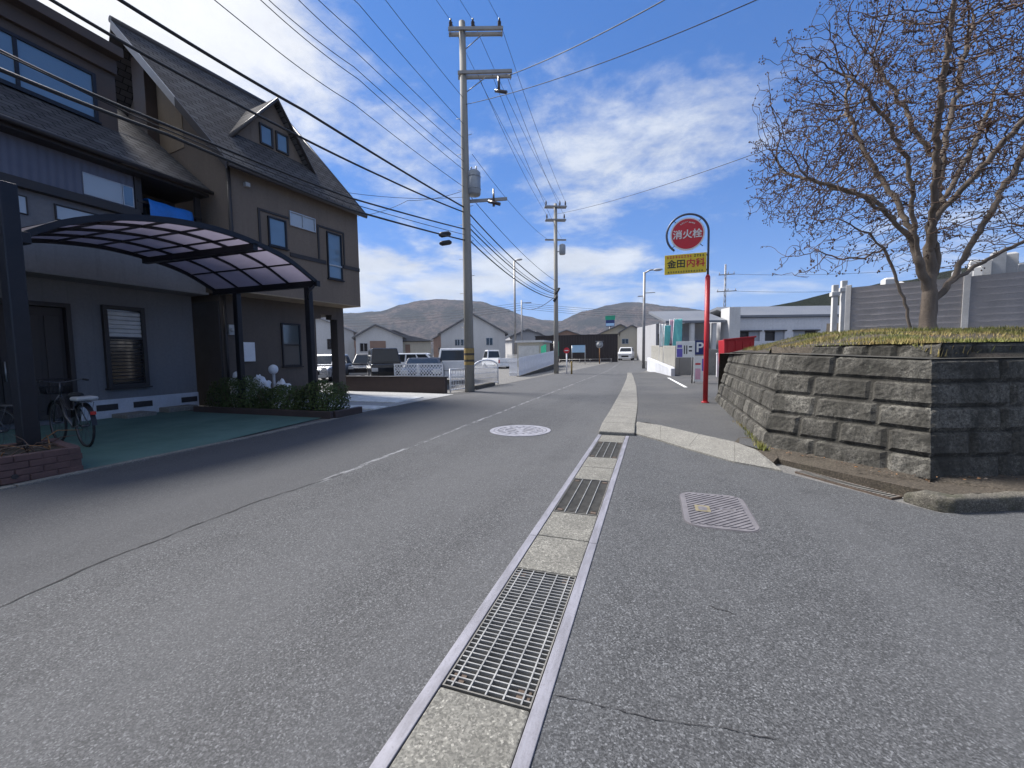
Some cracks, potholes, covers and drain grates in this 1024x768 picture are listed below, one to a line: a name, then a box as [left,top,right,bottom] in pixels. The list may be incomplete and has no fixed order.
manhole cover [490,425,551,437]
utility cover [679,492,761,533]
drain grate [554,478,610,517]
drain grate [795,470,902,500]
drain grate [442,568,576,715]
drain grate [588,441,623,459]
